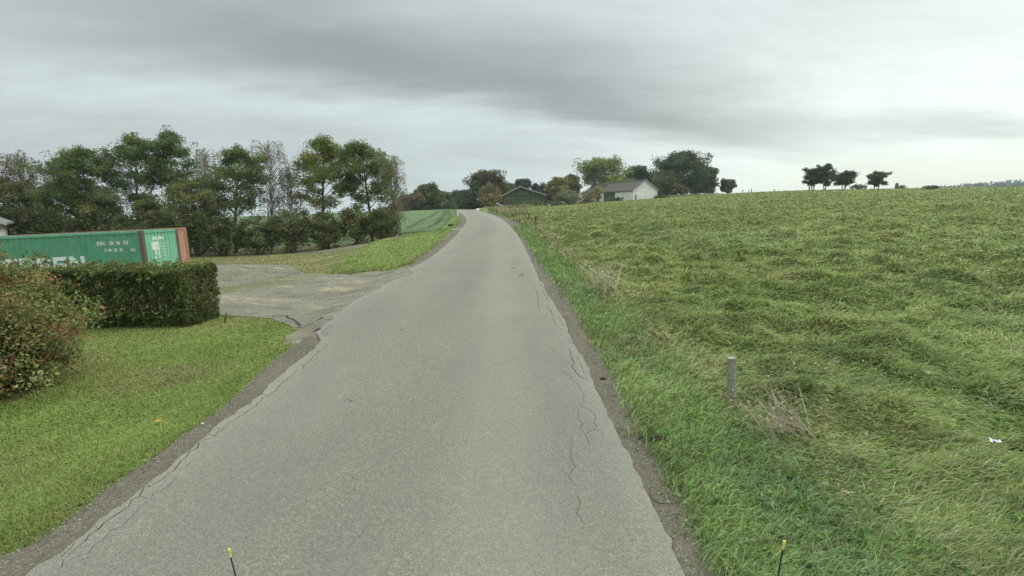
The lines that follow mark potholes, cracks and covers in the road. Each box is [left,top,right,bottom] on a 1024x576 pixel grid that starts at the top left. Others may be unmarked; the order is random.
crack [536,285,603,523]
crack [49,315,329,568]
